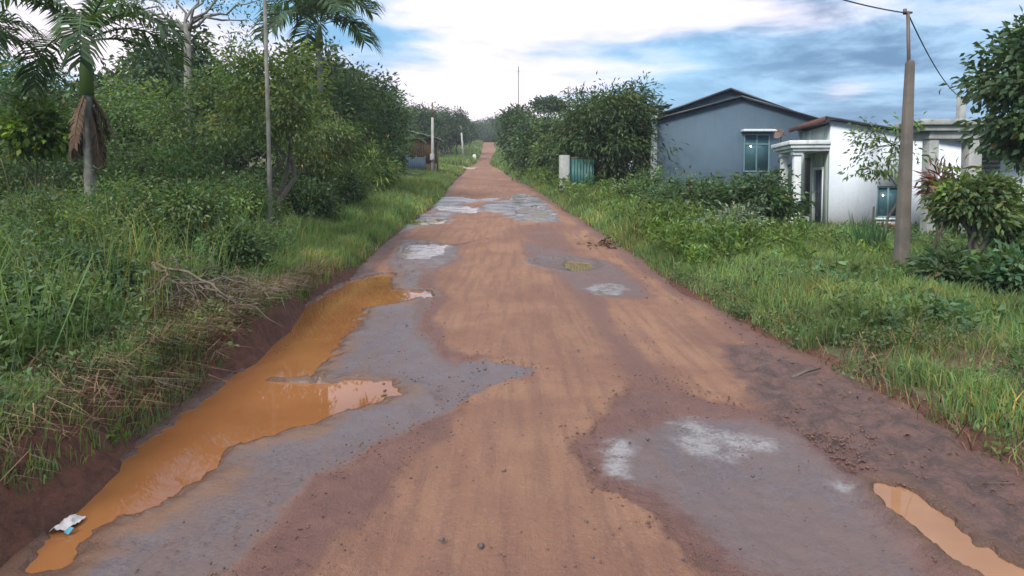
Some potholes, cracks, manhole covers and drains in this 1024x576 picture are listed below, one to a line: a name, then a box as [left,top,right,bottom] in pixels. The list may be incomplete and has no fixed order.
pothole [509,194,539,203]
pothole [528,257,601,272]
pothole [867,476,1024,576]
pothole [511,205,557,223]
pothole [17,272,433,576]
pothole [397,242,448,260]
pothole [433,204,483,214]
